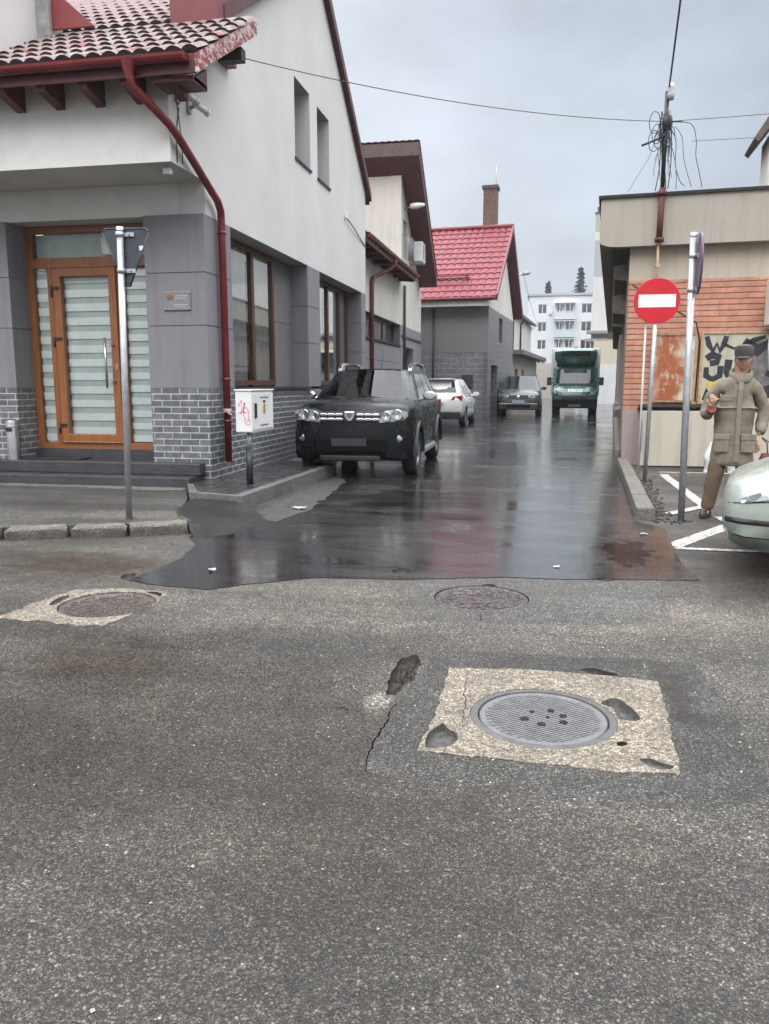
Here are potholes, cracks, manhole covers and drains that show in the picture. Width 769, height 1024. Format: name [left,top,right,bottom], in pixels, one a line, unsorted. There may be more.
pothole [425,723,458,748]
manhole cover [58,593,155,618]
pothole [639,758,674,769]
pothole [580,668,618,676]
manhole cover [435,586,528,613]
manhole cover [470,689,617,749]
pothole [386,654,421,695]
pothole [601,698,640,721]
crack [333,704,396,771]
